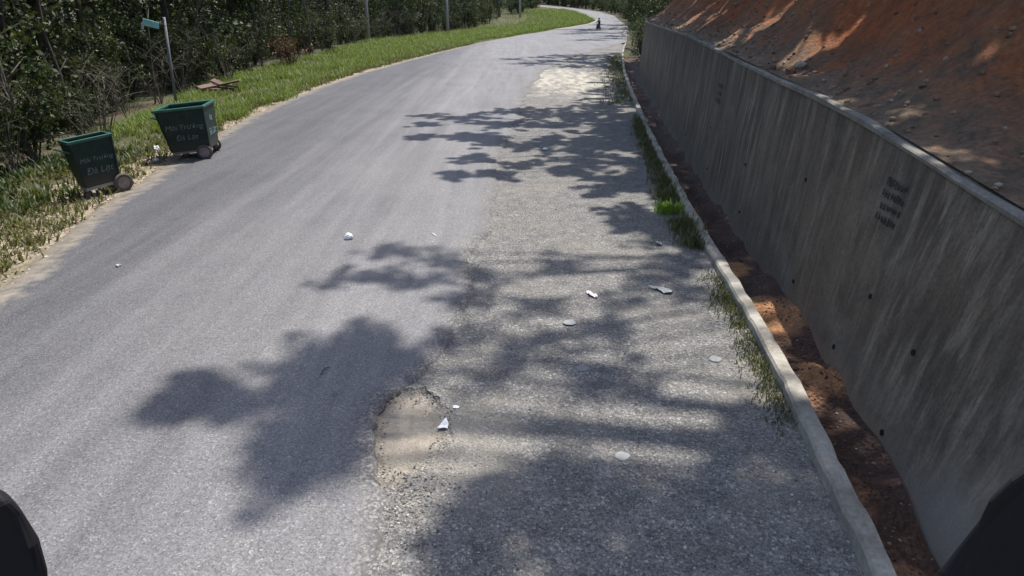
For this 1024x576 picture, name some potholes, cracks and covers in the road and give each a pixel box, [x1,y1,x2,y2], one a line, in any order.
pothole [373,386,455,490]
